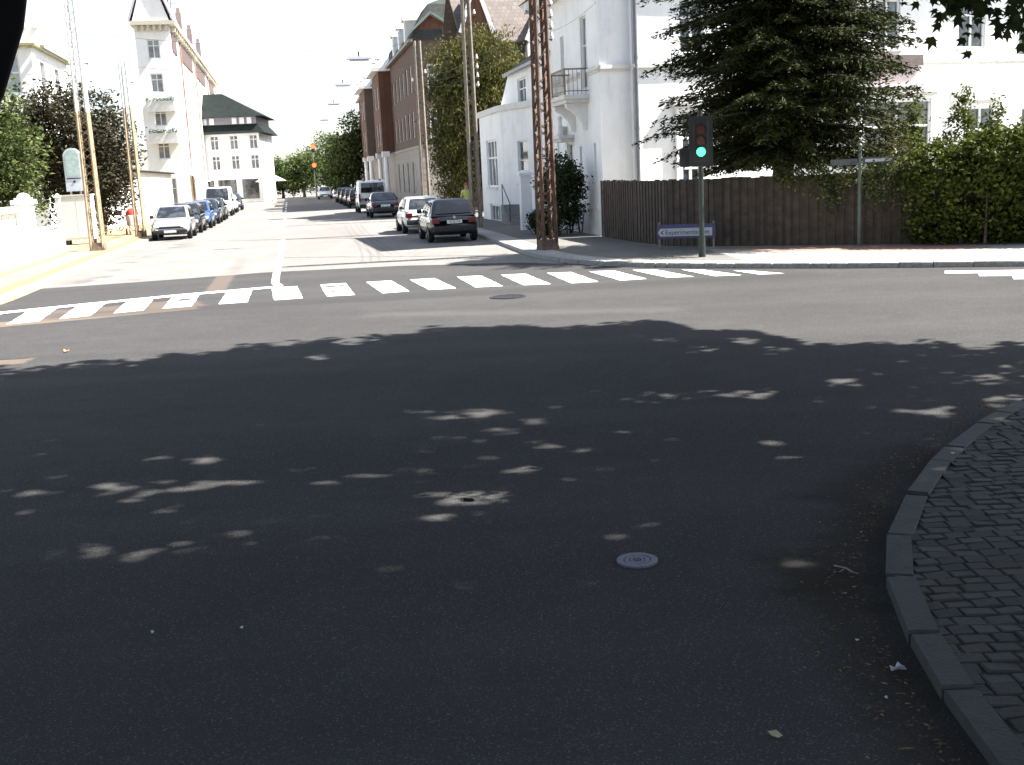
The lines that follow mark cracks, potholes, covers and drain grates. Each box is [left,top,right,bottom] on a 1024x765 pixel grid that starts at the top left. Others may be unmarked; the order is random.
manhole cover [617,552,658,569]
